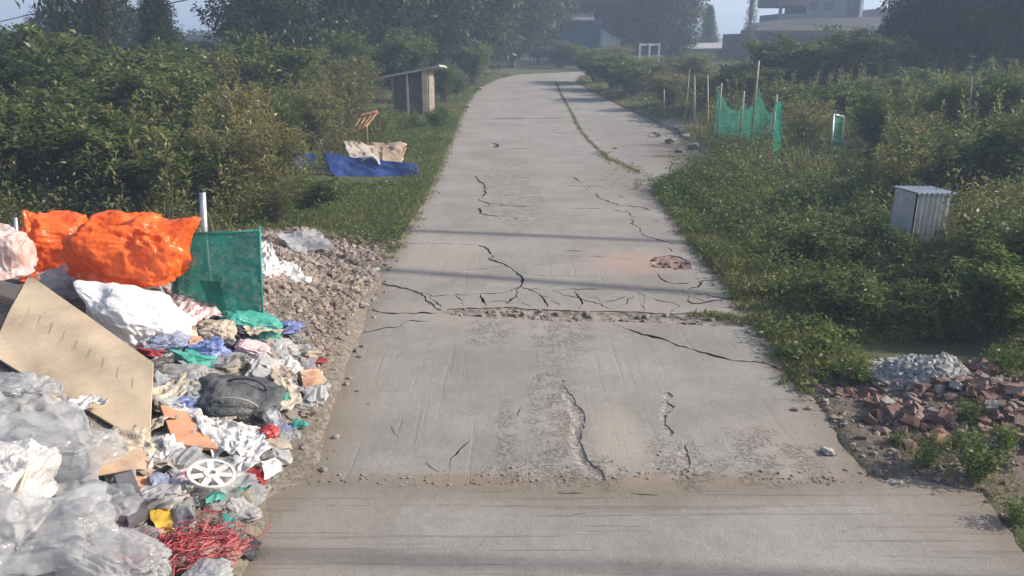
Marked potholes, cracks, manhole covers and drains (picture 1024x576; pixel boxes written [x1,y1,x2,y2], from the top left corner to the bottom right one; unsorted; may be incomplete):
crack [627,329,776,368]
crack [658,275,733,304]
pothole [649,255,691,271]
crack [367,243,680,332]
